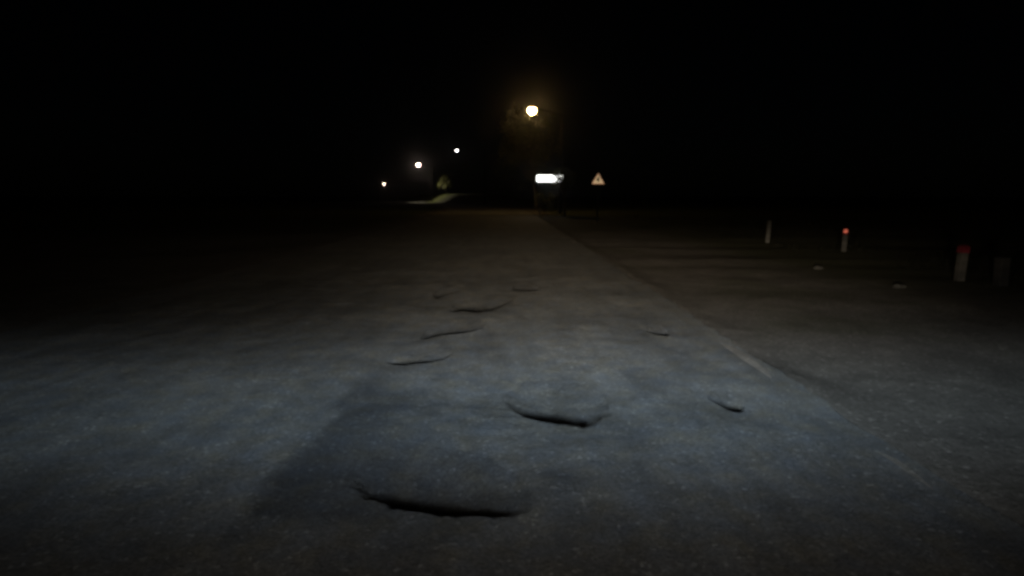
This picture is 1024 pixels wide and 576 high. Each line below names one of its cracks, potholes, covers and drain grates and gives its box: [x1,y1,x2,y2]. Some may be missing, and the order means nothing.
pothole [502,379,613,429]
pothole [512,280,539,291]
pothole [707,390,745,413]
pothole [432,284,465,299]
pothole [448,294,517,313]
pothole [386,346,455,366]
